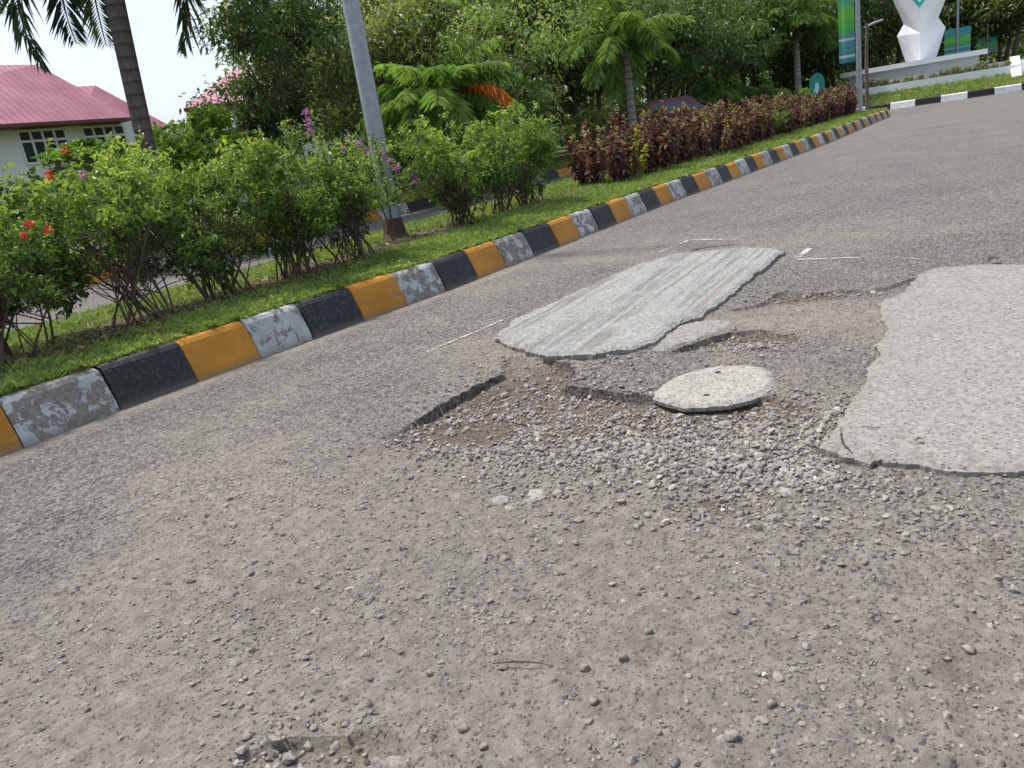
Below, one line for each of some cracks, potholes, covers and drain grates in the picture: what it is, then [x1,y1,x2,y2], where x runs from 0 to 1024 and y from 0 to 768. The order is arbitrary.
pothole [659,330,803,361]
manhole cover [652,365,775,412]
